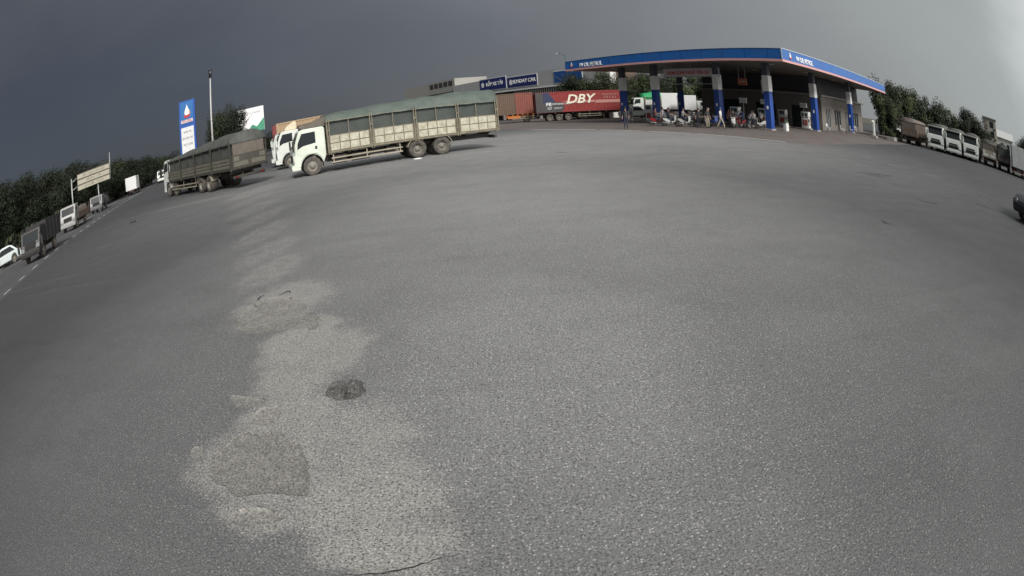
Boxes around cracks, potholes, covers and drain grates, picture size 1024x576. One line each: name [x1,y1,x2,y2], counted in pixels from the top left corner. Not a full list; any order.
pothole [324,379,366,401]
